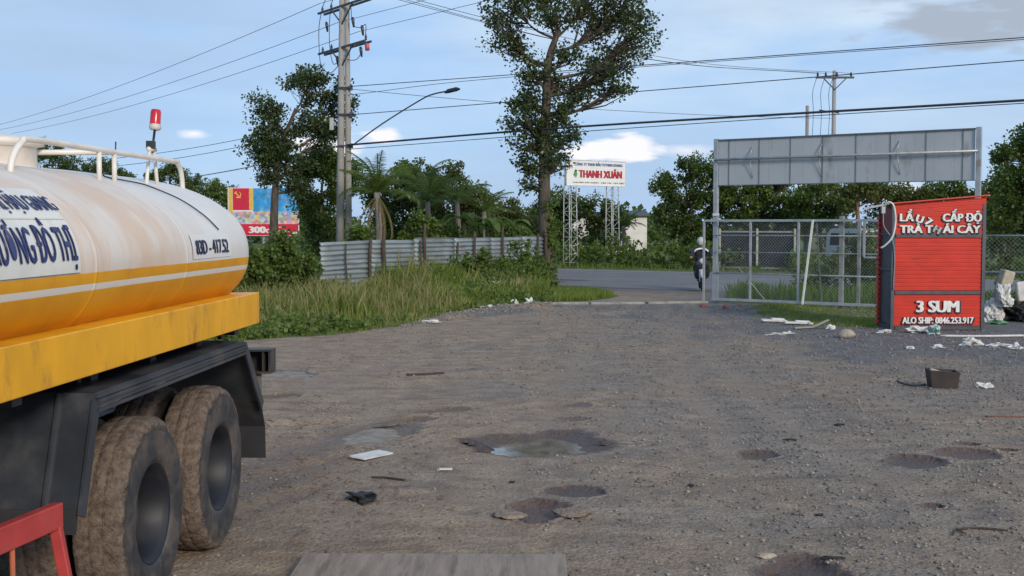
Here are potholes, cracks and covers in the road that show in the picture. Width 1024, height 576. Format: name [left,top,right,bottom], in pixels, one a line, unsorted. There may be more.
pothole [925,446,1008,462]
pothole [315,421,433,448]
pothole [401,406,477,415]
pothole [747,550,860,576]
pothole [734,448,784,461]
pothole [881,452,958,471]
pothole [444,428,634,460]
pothole [505,497,579,527]
pothole [538,484,612,500]
pothole [919,502,948,510]
pothole [556,401,596,409]
